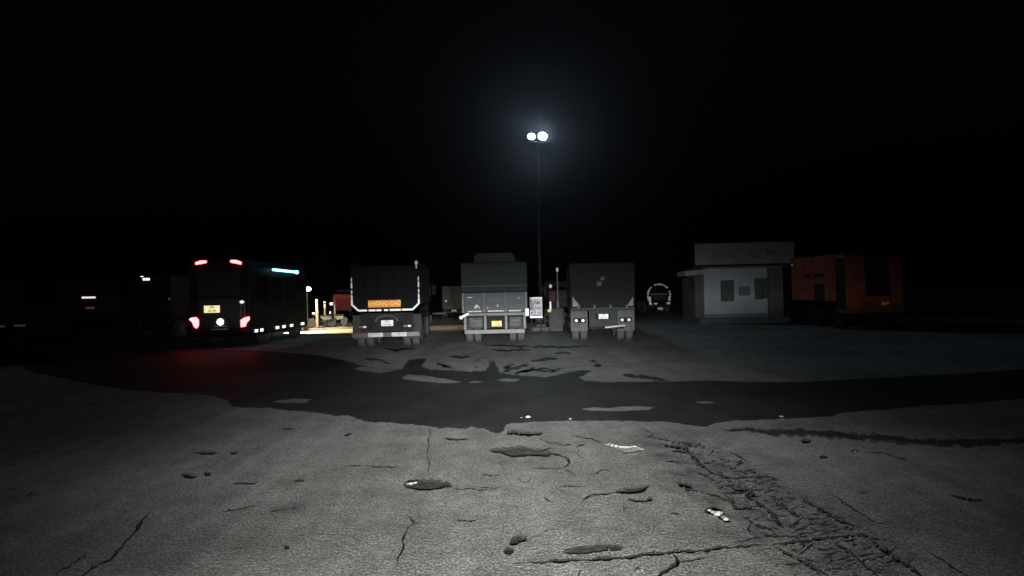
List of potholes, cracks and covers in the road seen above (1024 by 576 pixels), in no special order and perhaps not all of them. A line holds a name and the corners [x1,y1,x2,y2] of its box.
pothole [403,478,453,491]
pothole [489,445,554,458]
pothole [562,544,625,554]
pothole [509,534,527,546]
crack [394,514,432,568]
crack [455,435,626,514]
crack [55,511,151,576]
pothole [614,484,650,494]
crack [515,428,968,576]
